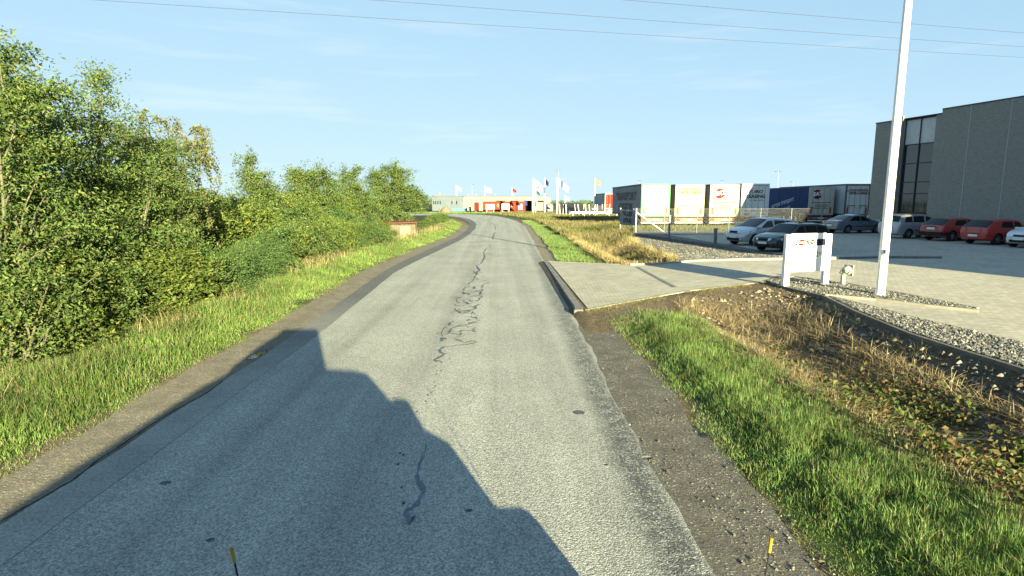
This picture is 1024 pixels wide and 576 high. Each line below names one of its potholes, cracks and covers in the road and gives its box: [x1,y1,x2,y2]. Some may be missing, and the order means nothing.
crack [403,444,427,524]
crack [433,219,496,363]
